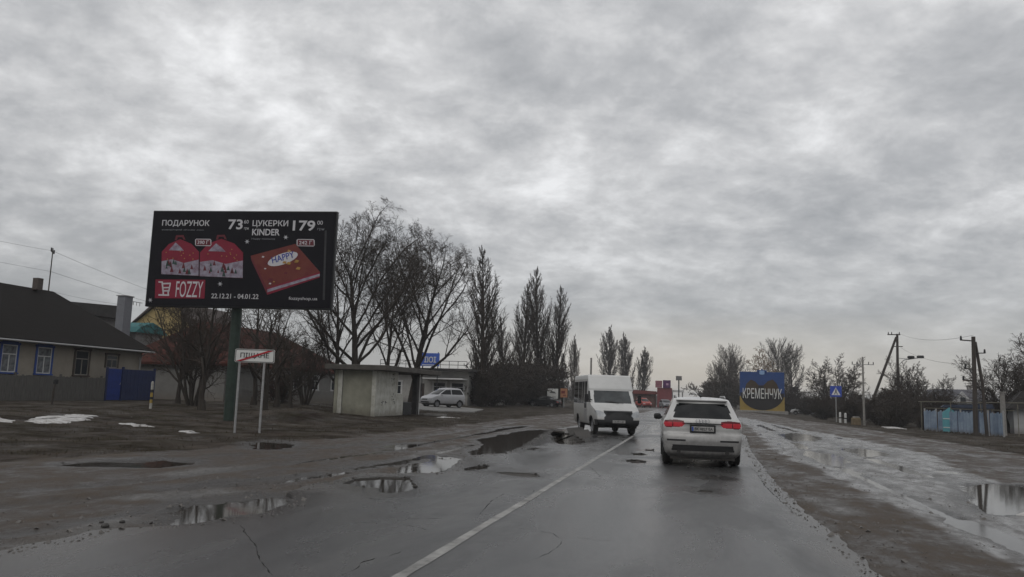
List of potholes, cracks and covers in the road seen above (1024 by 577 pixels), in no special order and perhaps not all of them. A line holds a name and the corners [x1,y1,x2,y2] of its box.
pothole [550,427,592,445]
pothole [343,476,418,493]
